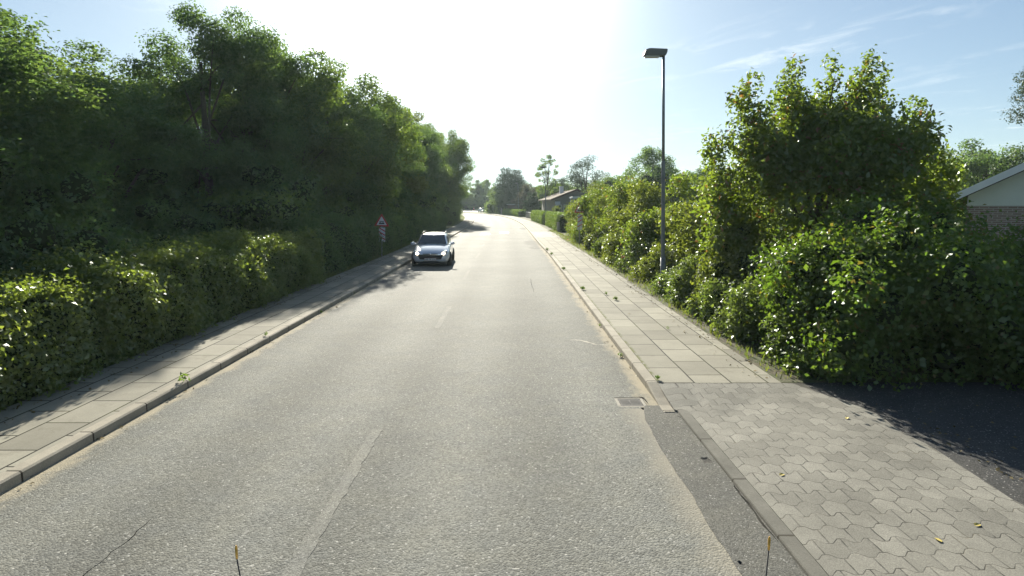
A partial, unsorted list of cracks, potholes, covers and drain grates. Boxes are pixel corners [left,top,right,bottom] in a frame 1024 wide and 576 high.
crack [83,519,151,576]
drain grate [614,398,646,407]
